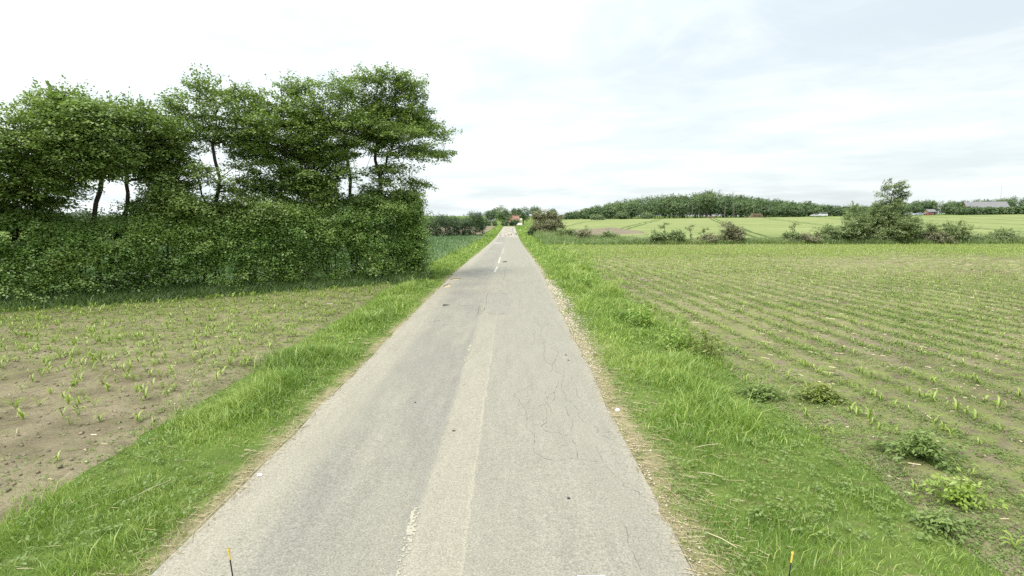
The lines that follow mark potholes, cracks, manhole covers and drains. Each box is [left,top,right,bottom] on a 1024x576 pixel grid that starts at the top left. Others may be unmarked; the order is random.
crack [518,320,642,495]
